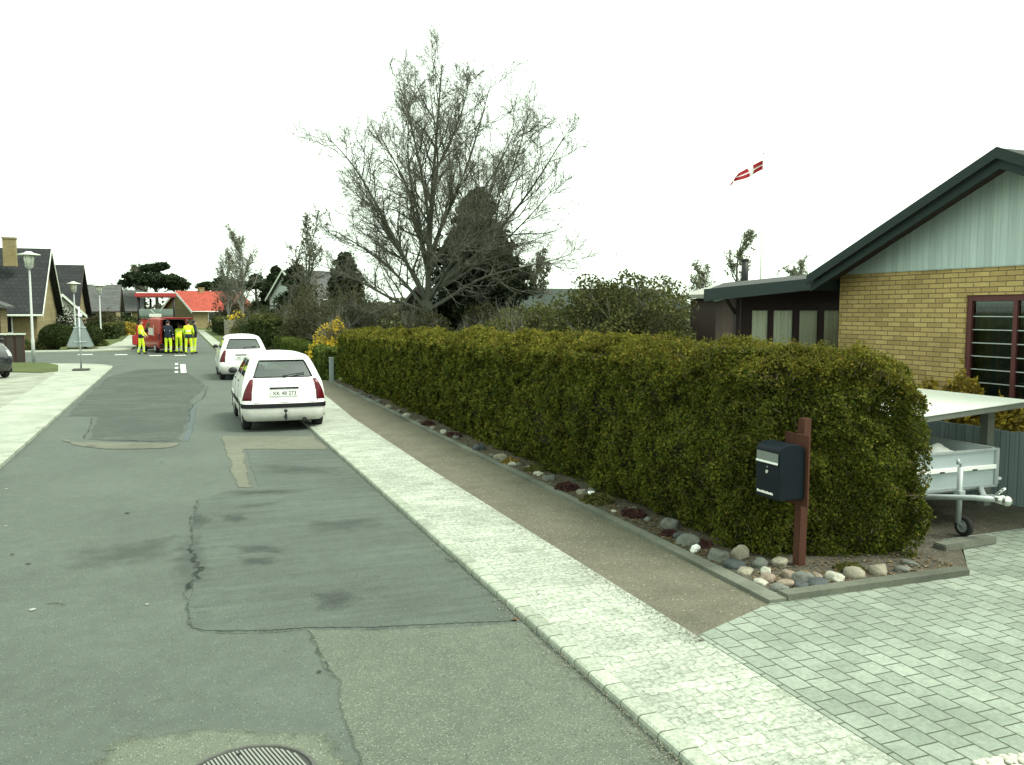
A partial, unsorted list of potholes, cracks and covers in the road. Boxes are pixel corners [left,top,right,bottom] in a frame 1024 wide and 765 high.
manhole cover [194,744,317,765]
crack [183,501,506,677]
